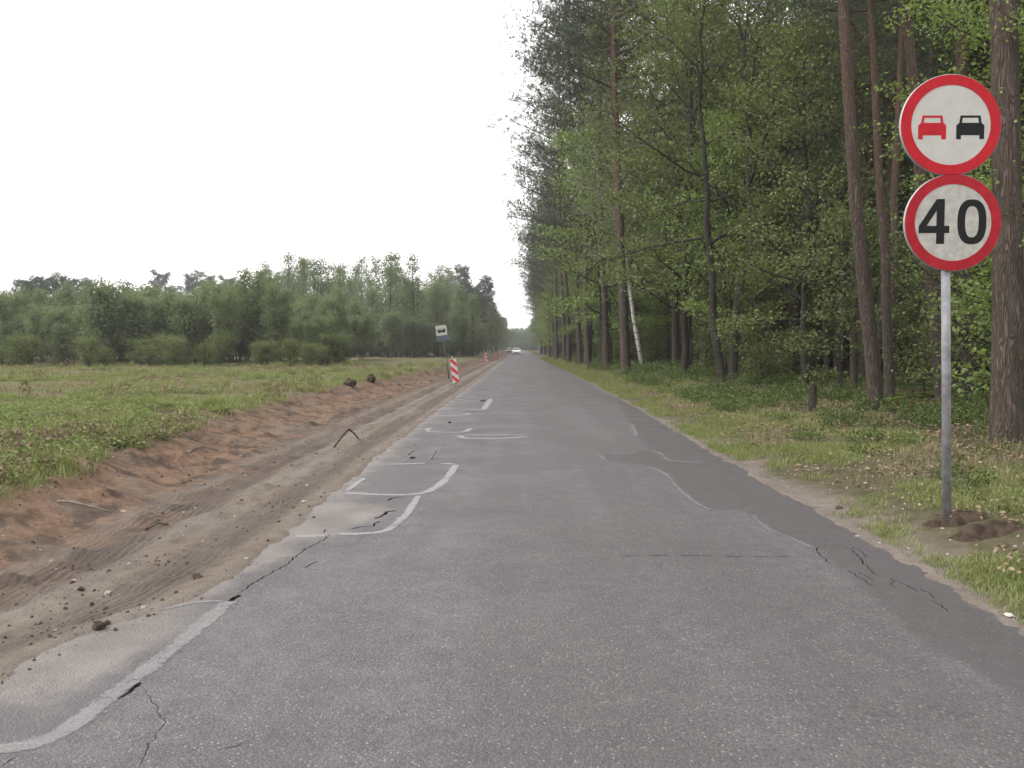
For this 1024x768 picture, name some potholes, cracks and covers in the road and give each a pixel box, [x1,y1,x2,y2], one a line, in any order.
crack [348,497,398,530]
crack [138,687,166,768]
crack [235,529,330,599]
crack [815,546,947,611]
